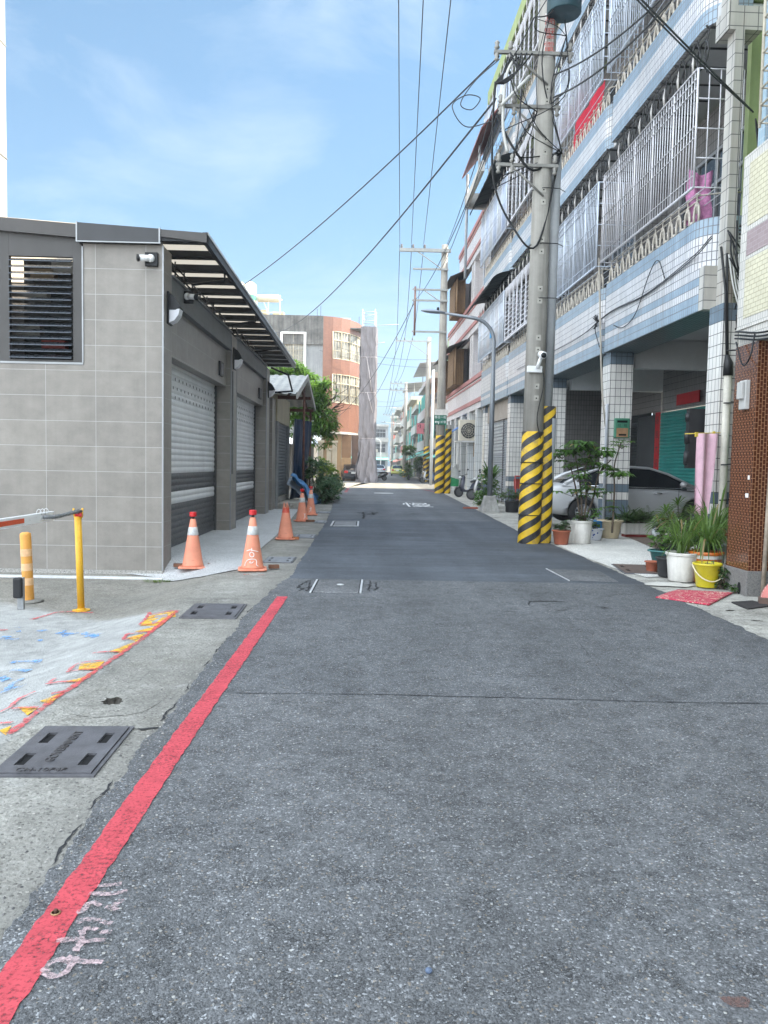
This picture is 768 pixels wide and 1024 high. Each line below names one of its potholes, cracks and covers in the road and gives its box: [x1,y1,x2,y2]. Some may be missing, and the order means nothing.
manhole cover [309,579,363,593]
crack [501,589,620,690]
